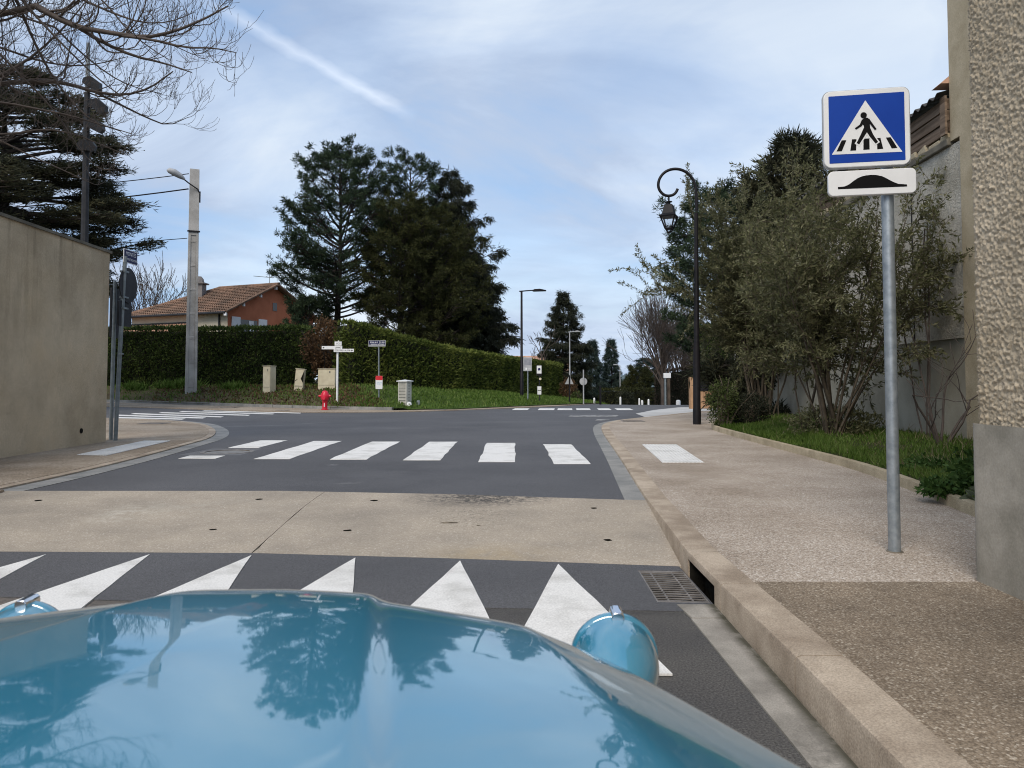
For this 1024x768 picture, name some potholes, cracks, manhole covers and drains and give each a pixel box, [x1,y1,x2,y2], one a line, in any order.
drain grate [638,570,710,603]
